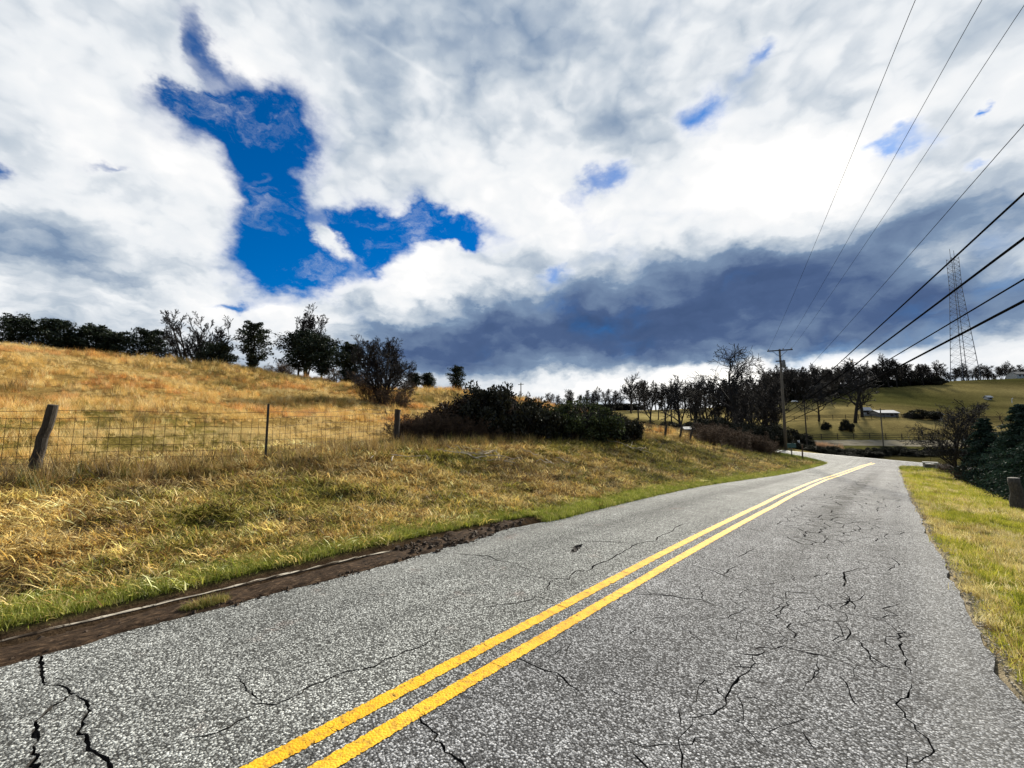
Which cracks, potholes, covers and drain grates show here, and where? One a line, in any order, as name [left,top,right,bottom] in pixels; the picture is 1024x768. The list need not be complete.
crack [456,522,690,607]
crack [628,531,935,768]
crack [777,479,905,547]
crack [25,656,114,768]
crack [419,717,466,768]
crack [185,629,438,741]
